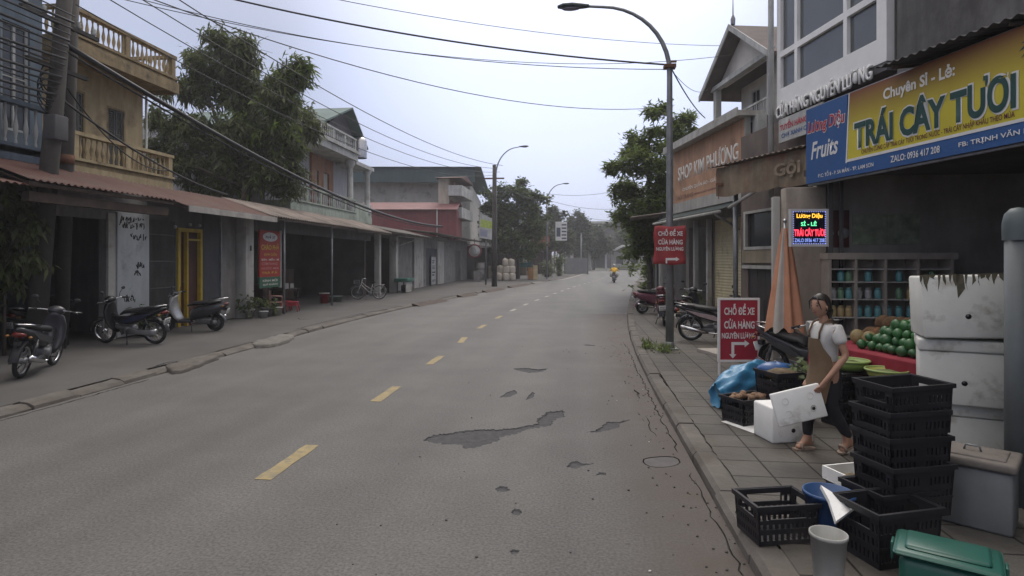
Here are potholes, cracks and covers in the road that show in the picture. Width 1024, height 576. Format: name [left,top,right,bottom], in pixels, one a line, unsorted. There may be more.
manhole cover [643,456,681,468]
crack [624,344,761,576]
pothole [423,410,565,449]
pothole [590,420,628,433]
